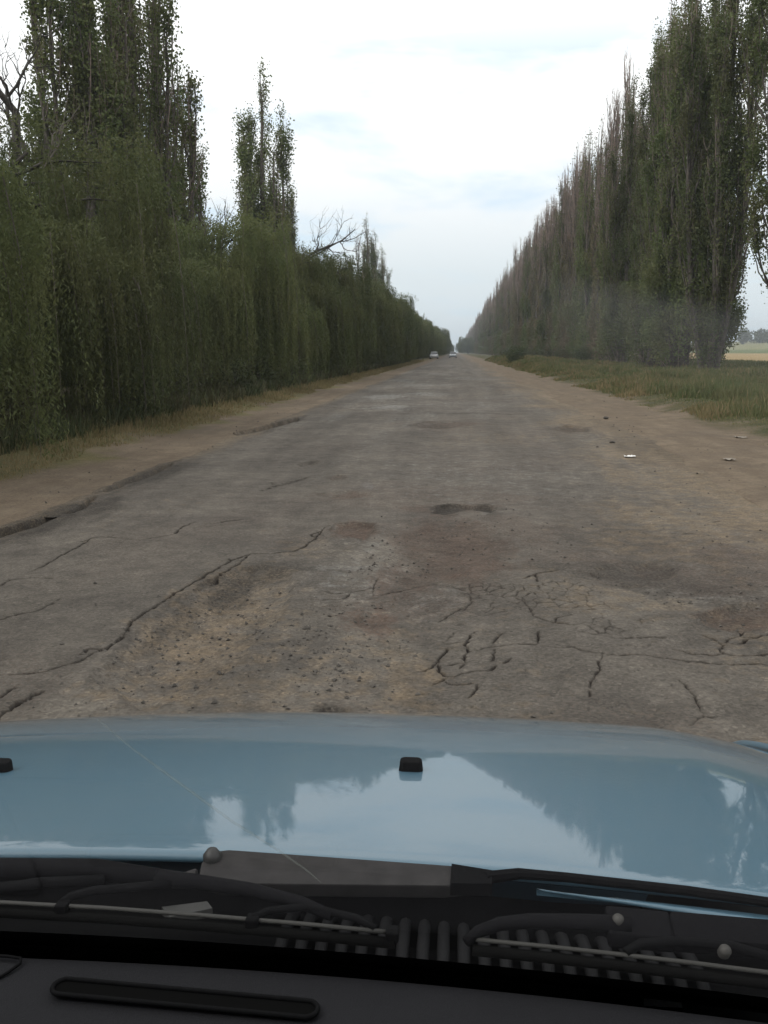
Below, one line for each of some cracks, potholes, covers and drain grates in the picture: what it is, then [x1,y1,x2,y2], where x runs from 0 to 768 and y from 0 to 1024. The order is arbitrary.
pothole [421,502,507,518]
crack [0,517,768,739]
pothole [400,420,474,430]
crack [249,476,319,493]
pothole [576,558,695,594]
pothole [545,424,602,434]
